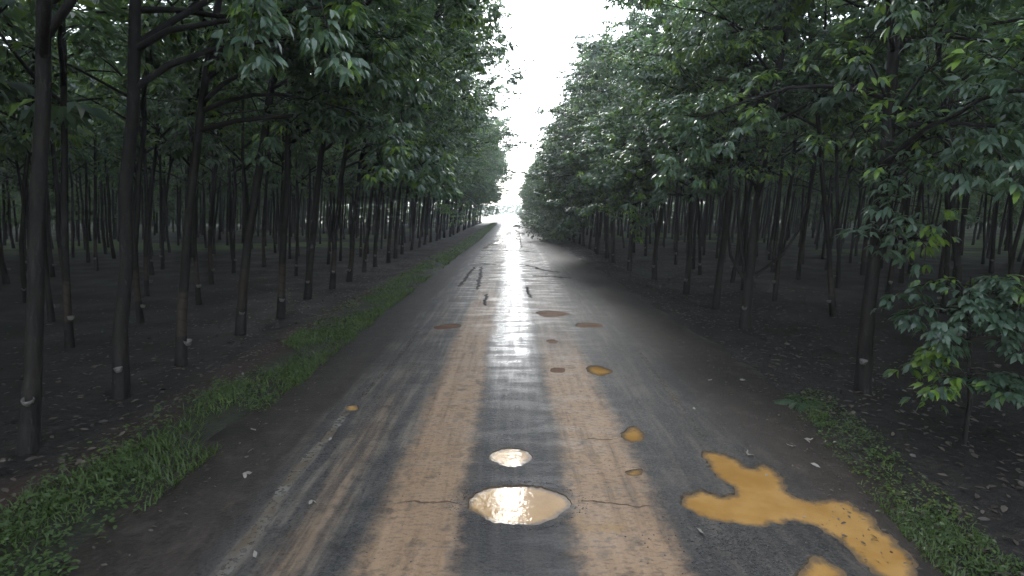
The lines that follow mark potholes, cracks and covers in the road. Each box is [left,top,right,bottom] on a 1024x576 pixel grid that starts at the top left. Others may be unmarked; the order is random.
pothole [620,426,645,442]
pothole [586,365,613,376]
crack [457,250,564,306]
crack [585,500,650,508]
pothole [467,484,572,525]
pothole [489,448,533,467]
